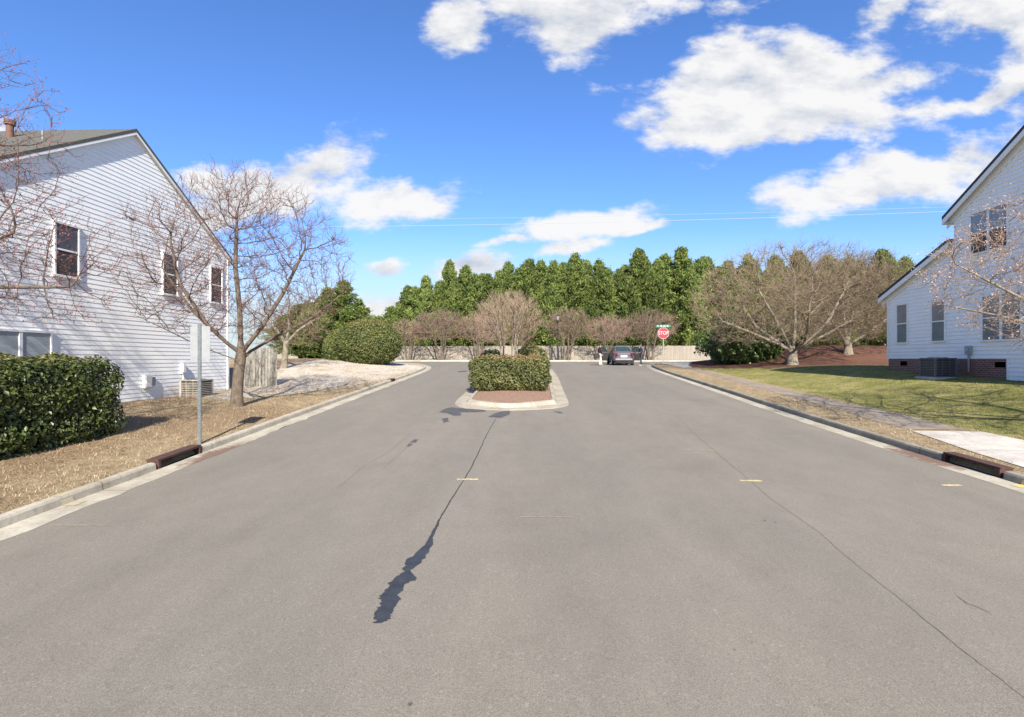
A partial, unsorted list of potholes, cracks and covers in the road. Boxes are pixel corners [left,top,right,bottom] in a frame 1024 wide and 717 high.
drain grate [942,452,1014,479]
crack [688,427,1021,695]
crack [327,419,496,717]
drain grate [146,445,202,469]
